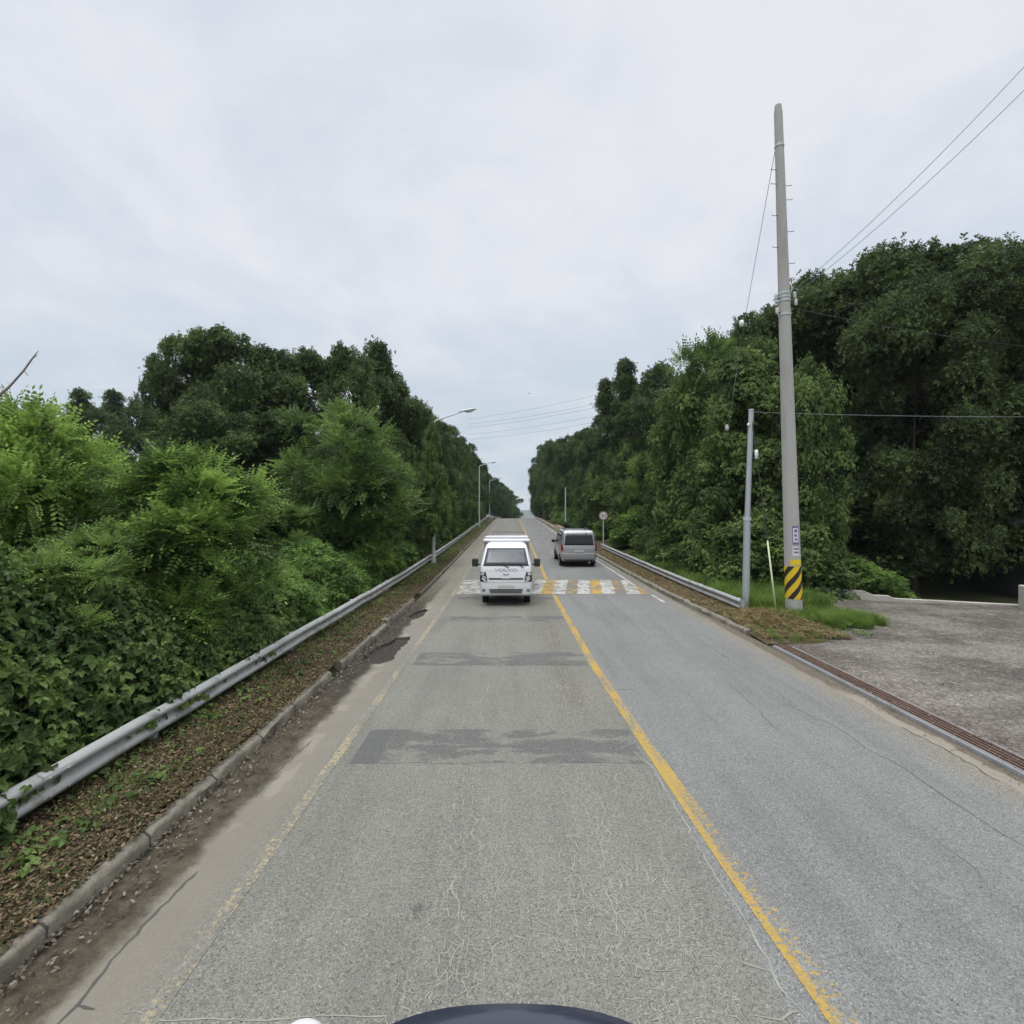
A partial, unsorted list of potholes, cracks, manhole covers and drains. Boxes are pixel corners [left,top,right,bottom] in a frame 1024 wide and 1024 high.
drain grate [773,644,1024,779]
crack [639,602,1022,845]
crack [376,752,813,1024]
pothole [362,636,411,664]
pothole [408,609,428,620]
